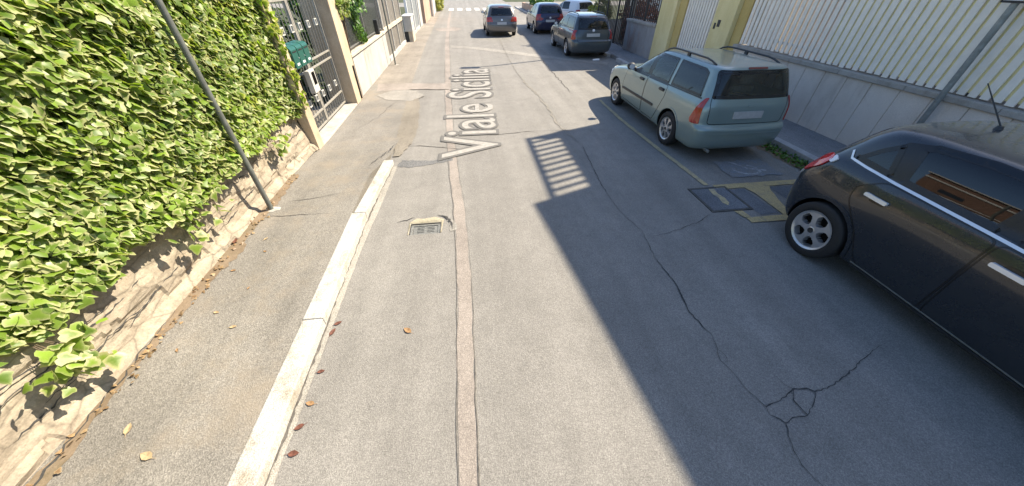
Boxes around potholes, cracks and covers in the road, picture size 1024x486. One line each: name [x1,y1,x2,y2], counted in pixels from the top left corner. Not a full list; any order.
crack [490,40,885,486]
drain grate [409,222,441,235]
manhole cover [687,186,753,213]
